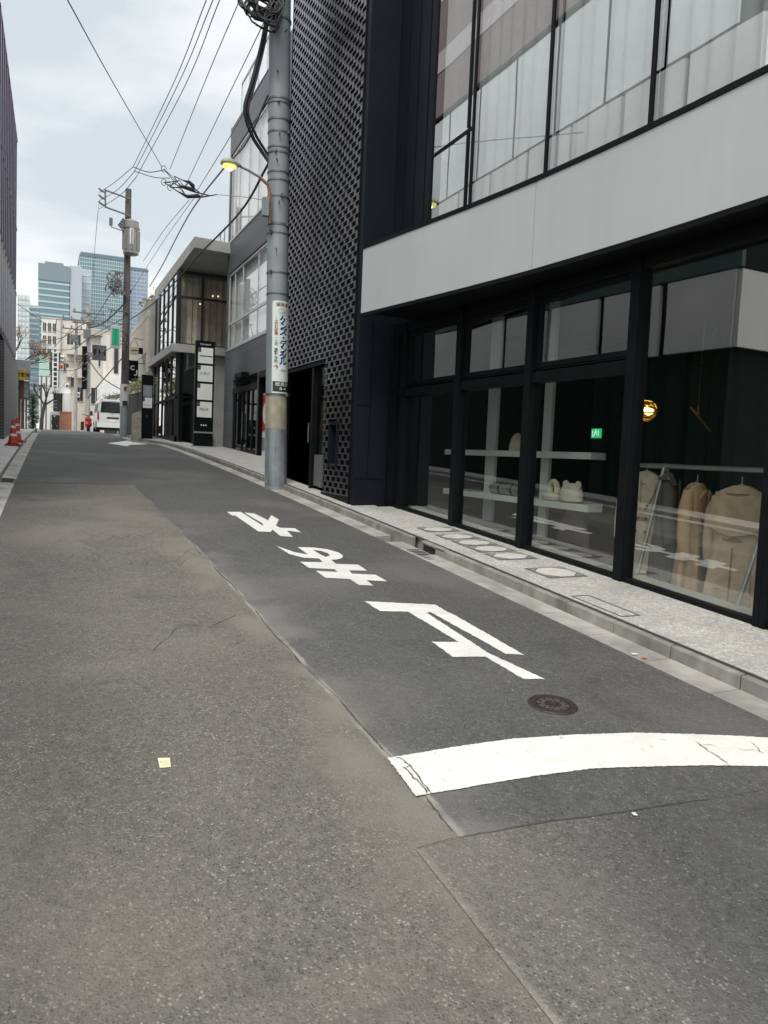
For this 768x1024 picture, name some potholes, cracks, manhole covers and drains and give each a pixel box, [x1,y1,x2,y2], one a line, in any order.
manhole cover [527,694,578,715]
crack [58,534,203,567]
crack [397,757,432,794]
drain grate [387,540,448,559]
